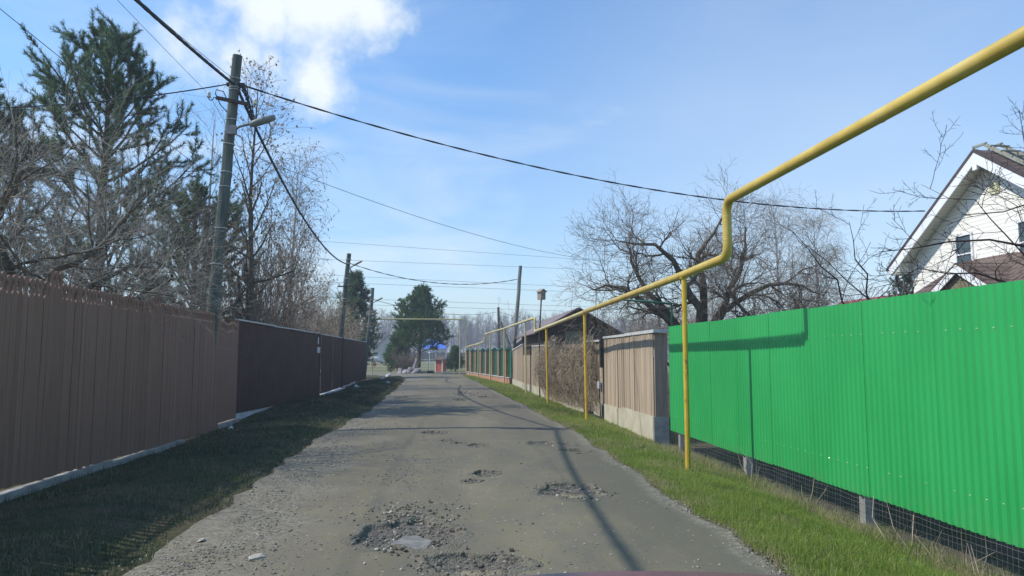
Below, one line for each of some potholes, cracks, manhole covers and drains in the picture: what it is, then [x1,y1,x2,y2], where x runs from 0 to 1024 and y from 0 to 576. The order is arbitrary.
pothole [469,469,503,477]
pothole [403,545,550,576]
pothole [340,495,473,558]
pothole [526,481,619,502]
